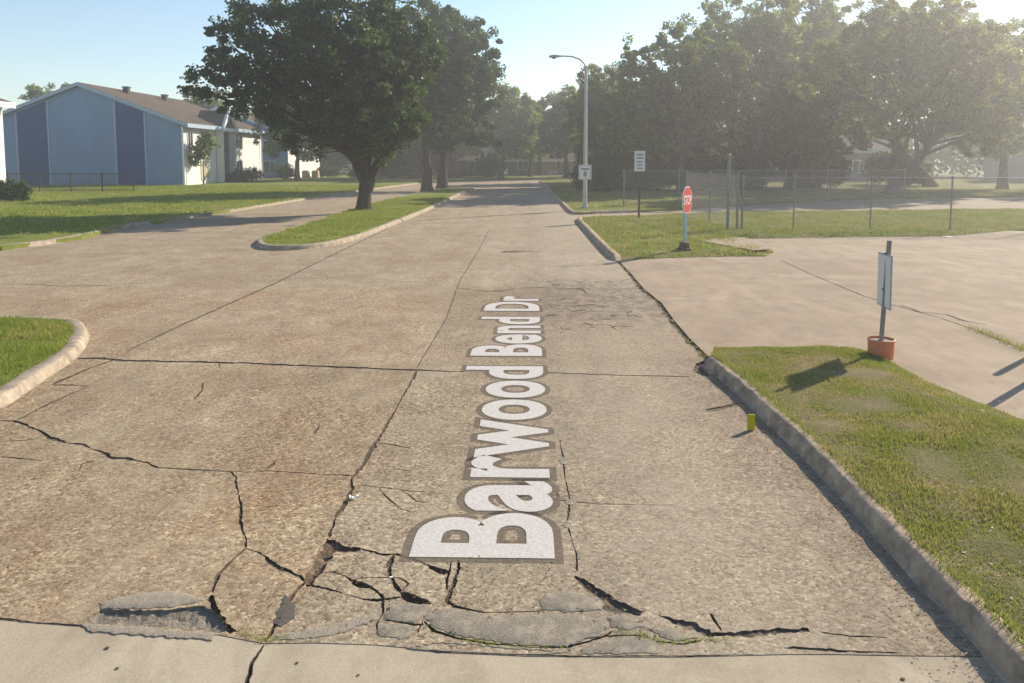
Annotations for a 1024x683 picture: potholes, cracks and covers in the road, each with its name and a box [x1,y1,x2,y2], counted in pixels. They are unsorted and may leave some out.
pothole [85,606,229,633]
crack [0,357,752,683]
crack [457,262,707,358]
